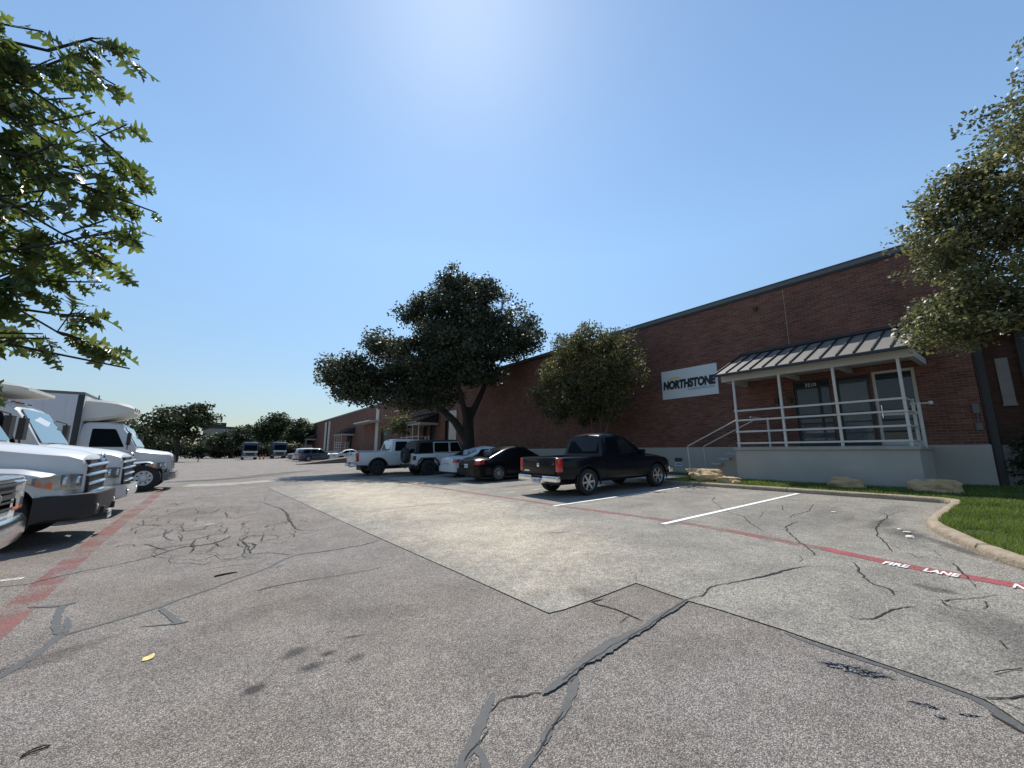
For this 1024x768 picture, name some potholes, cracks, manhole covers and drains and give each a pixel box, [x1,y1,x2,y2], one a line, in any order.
pothole [815,661,898,681]
crack [107,495,329,565]
crack [853,511,997,619]
crack [464,565,814,761]
